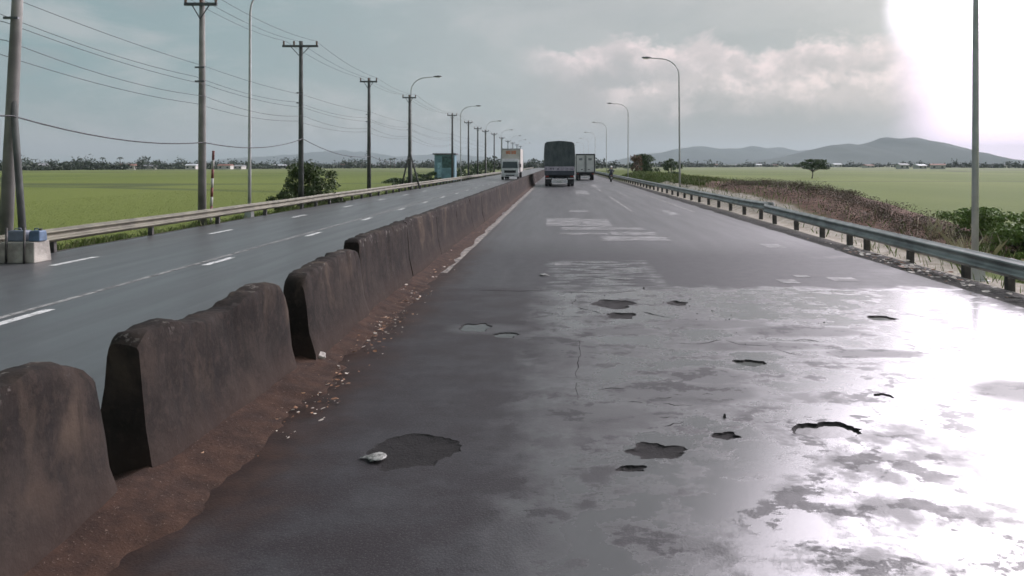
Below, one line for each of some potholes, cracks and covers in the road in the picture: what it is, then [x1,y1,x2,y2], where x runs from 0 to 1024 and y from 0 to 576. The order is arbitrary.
pothole [624,442,688,459]
pothole [791,421,862,439]
pothole [591,299,637,309]
pothole [732,359,767,367]
pothole [711,431,742,440]
pothole [459,323,492,332]
pothole [365,433,462,471]
